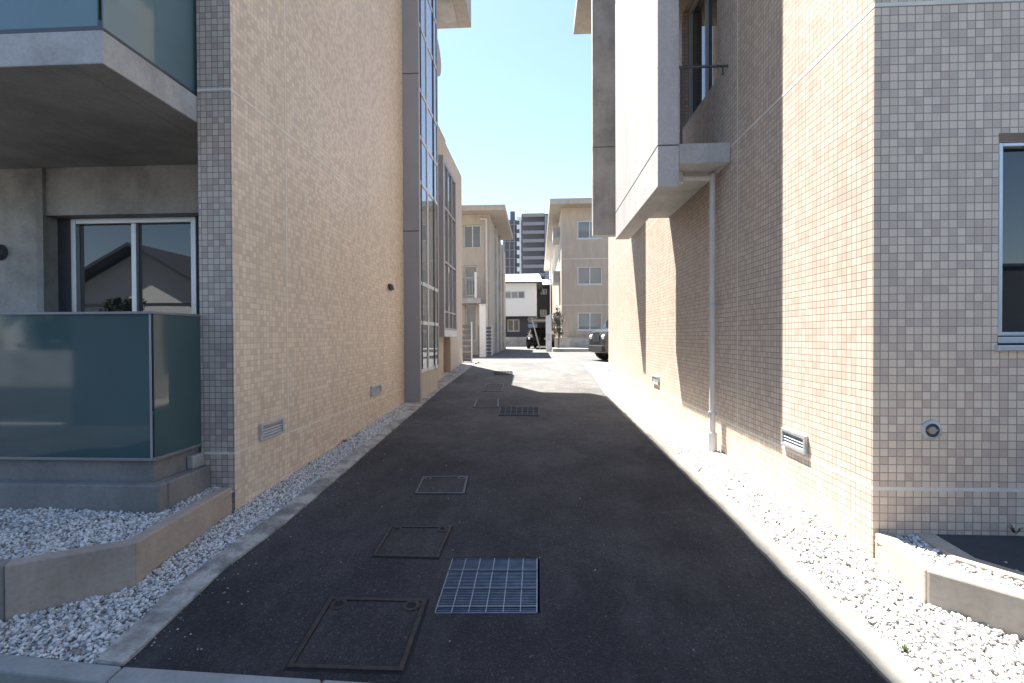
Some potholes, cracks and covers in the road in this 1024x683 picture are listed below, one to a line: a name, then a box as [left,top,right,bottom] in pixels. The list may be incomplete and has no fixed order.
manhole cover [283,597,430,675]
drain grate [499,407,539,416]
manhole cover [414,476,469,495]
manhole cover [482,383,505,392]
manhole cover [371,526,454,560]
drain grate [434,558,540,614]
manhole cover [473,399,499,407]
